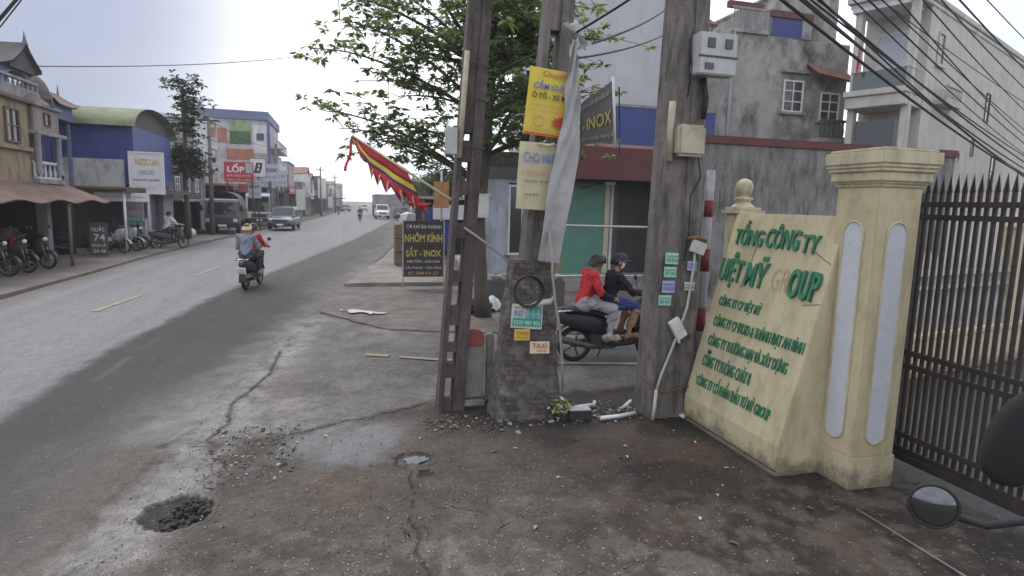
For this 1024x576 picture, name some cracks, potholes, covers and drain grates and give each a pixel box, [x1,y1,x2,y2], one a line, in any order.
pothole [126,490,222,537]
pothole [391,450,437,469]
crack [189,336,435,490]
crack [379,463,509,576]
